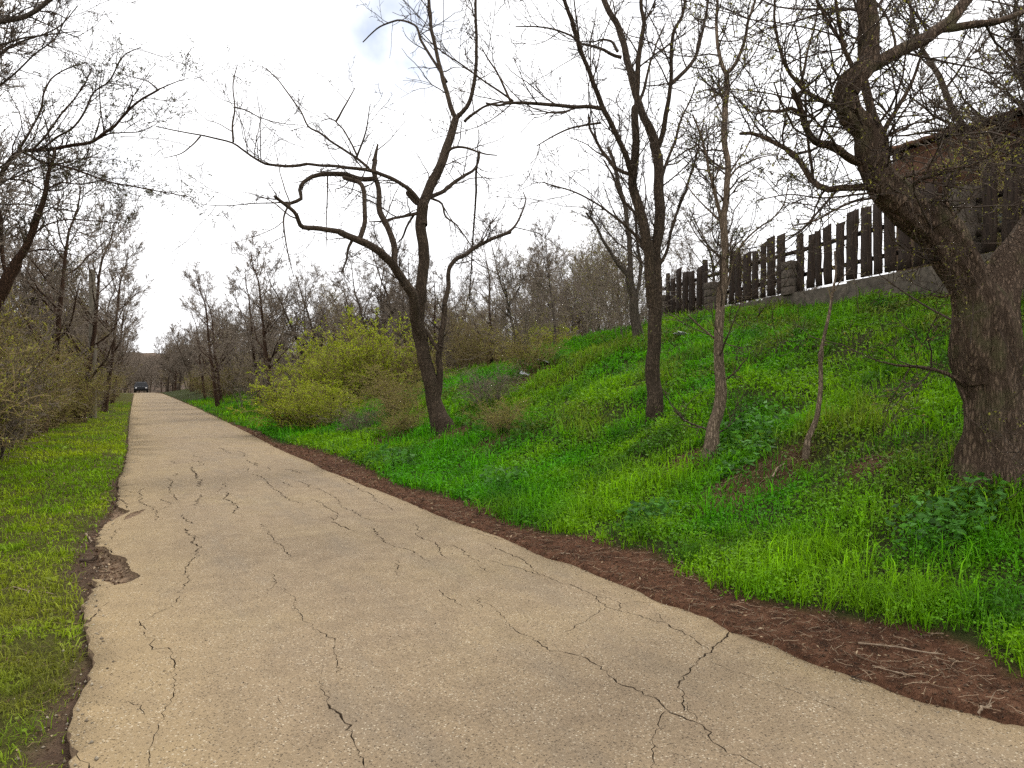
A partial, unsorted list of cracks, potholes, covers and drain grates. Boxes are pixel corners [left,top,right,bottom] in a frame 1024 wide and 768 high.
crack [128,621,177,764]
crack [256,574,364,766]
pothole [96,546,140,585]
crack [119,448,501,618]
crack [477,542,848,768]
